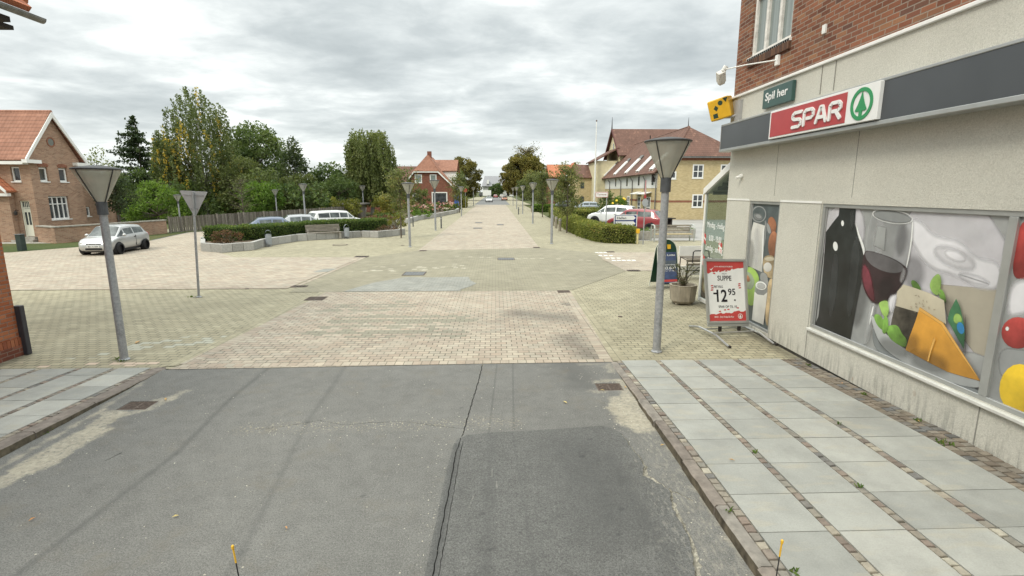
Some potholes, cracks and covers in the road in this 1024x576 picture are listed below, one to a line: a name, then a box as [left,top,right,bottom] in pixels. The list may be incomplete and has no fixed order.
crack [268,365,483,576]
